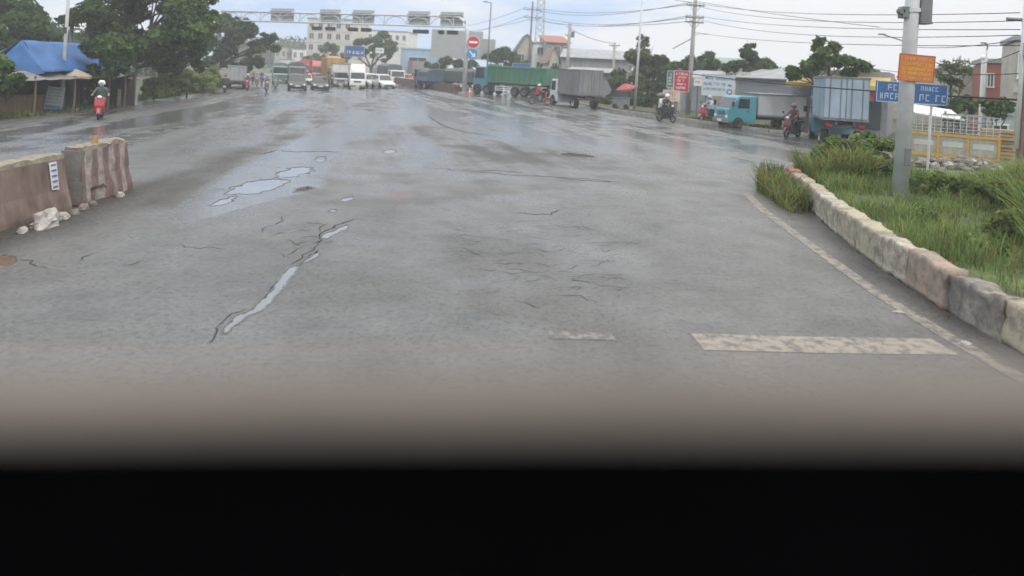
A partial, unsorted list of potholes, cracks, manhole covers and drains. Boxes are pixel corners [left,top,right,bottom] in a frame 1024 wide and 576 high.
pothole [274,167,316,178]
pothole [208,195,238,206]
crack [452,209,630,308]
pothole [223,178,292,195]
